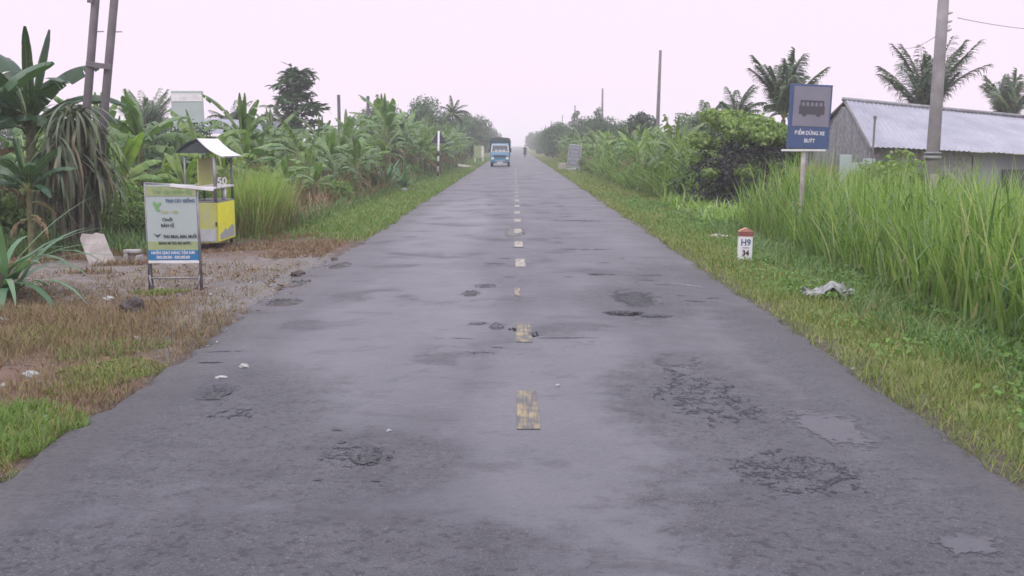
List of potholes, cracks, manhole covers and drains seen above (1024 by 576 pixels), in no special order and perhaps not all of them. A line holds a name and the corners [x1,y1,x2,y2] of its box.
pothole [356,450,382,465]
crack [653,367,770,428]
crack [715,449,875,496]
pothole [195,387,235,399]
crack [198,399,252,419]
